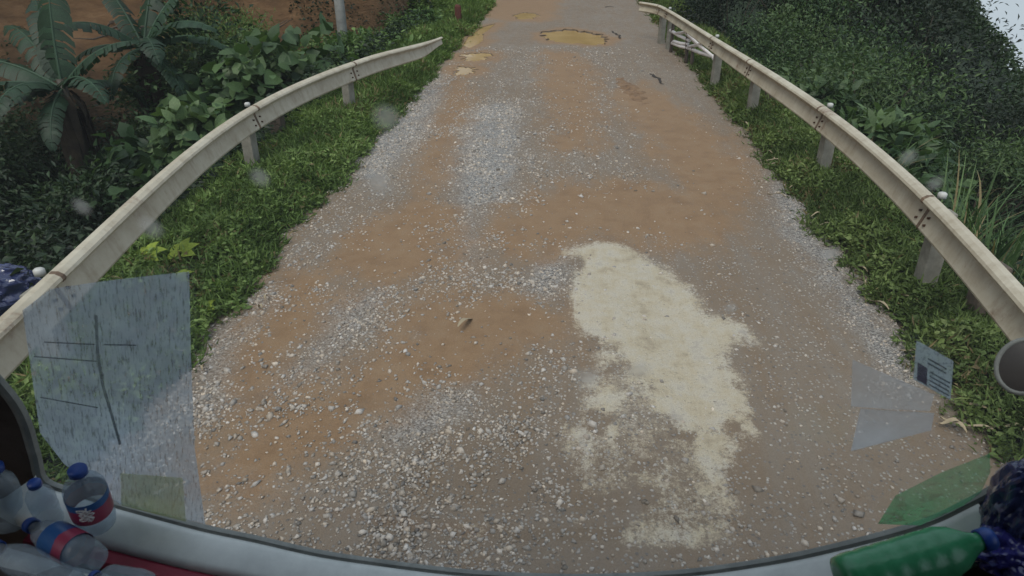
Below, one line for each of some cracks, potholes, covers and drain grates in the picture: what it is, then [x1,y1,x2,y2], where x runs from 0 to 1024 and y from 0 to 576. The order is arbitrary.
pothole [507,12,545,20]
pothole [453,51,501,63]
pothole [462,23,496,49]
pothole [534,28,616,47]
pothole [446,65,486,78]
